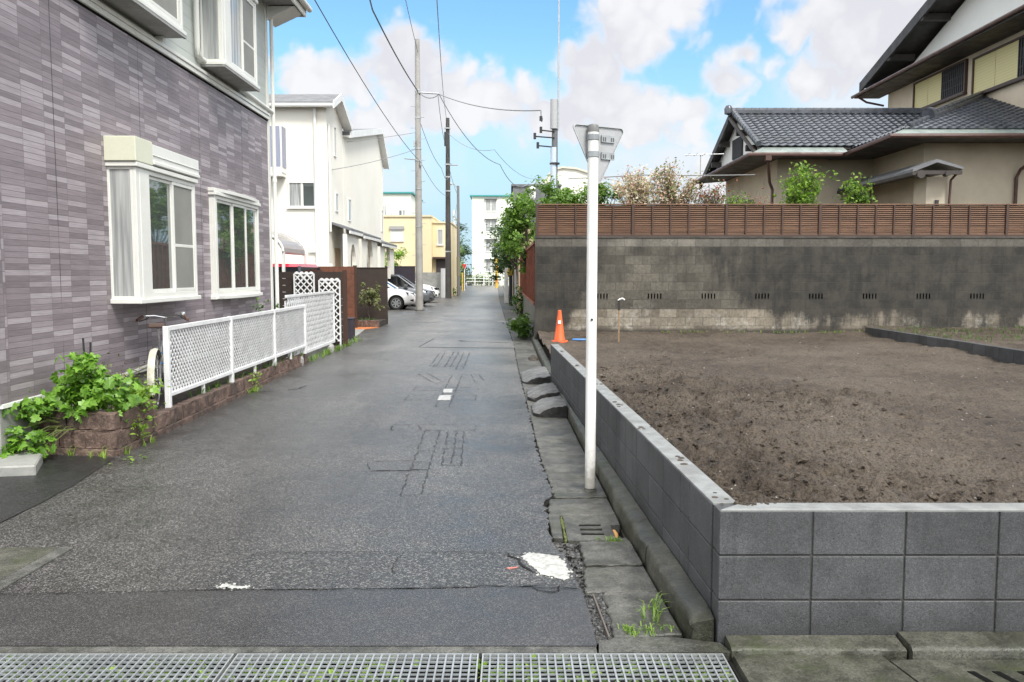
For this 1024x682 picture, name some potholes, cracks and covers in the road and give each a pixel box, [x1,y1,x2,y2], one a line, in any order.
drain grate [0,653,234,682]
drain grate [217,653,479,682]
drain grate [480,653,738,682]
